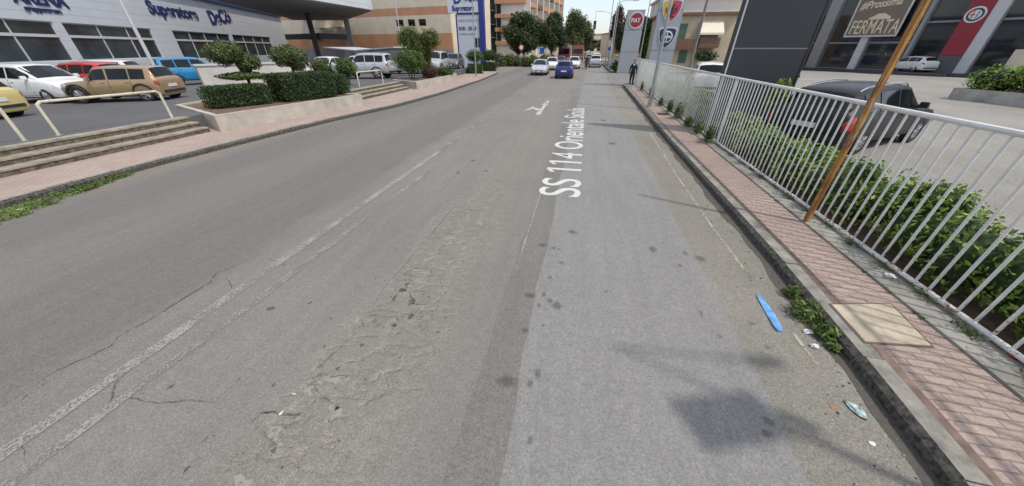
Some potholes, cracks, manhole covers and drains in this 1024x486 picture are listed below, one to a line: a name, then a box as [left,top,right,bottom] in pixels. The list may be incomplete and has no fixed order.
crack [252,345,352,448]
manhole cover [829,303,935,348]
crack [375,166,467,305]
crack [15,257,254,400]
